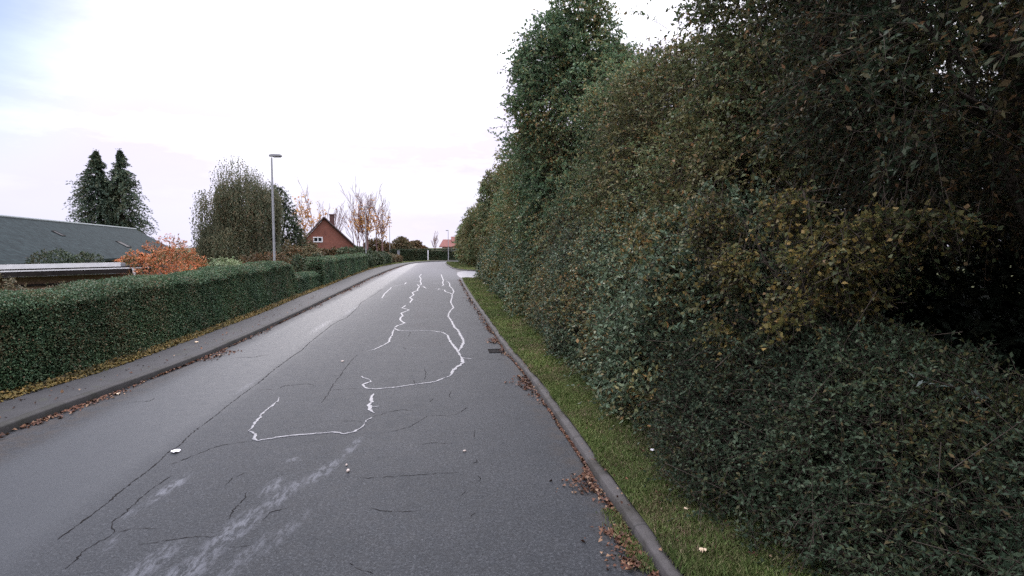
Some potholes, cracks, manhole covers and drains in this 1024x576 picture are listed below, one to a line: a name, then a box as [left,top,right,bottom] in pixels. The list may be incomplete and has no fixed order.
crack [65,275,471,569]
